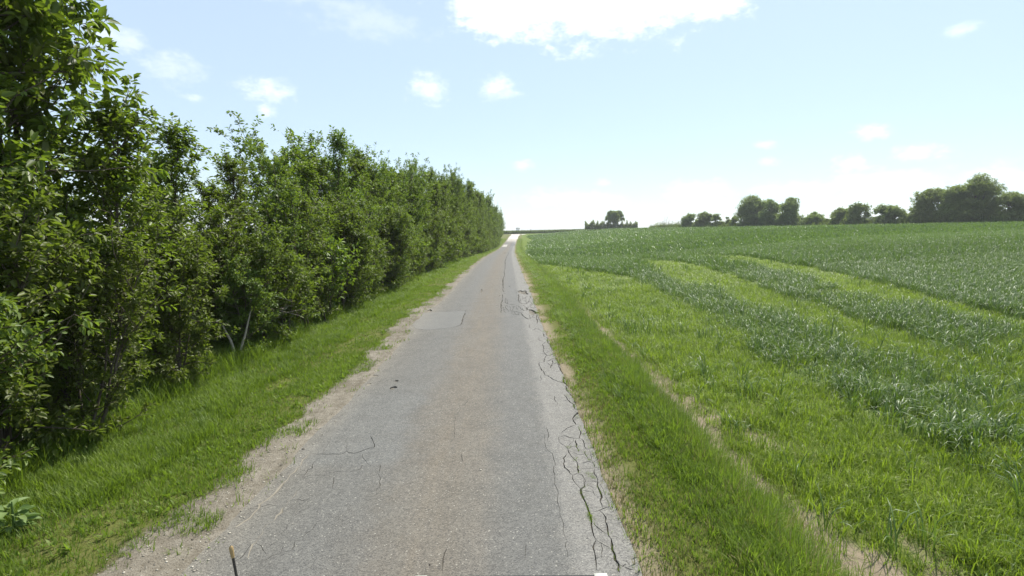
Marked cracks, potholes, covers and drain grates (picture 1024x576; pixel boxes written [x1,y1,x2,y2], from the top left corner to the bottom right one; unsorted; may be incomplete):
crack [500,253,632,573]
crack [236,437,381,562]
